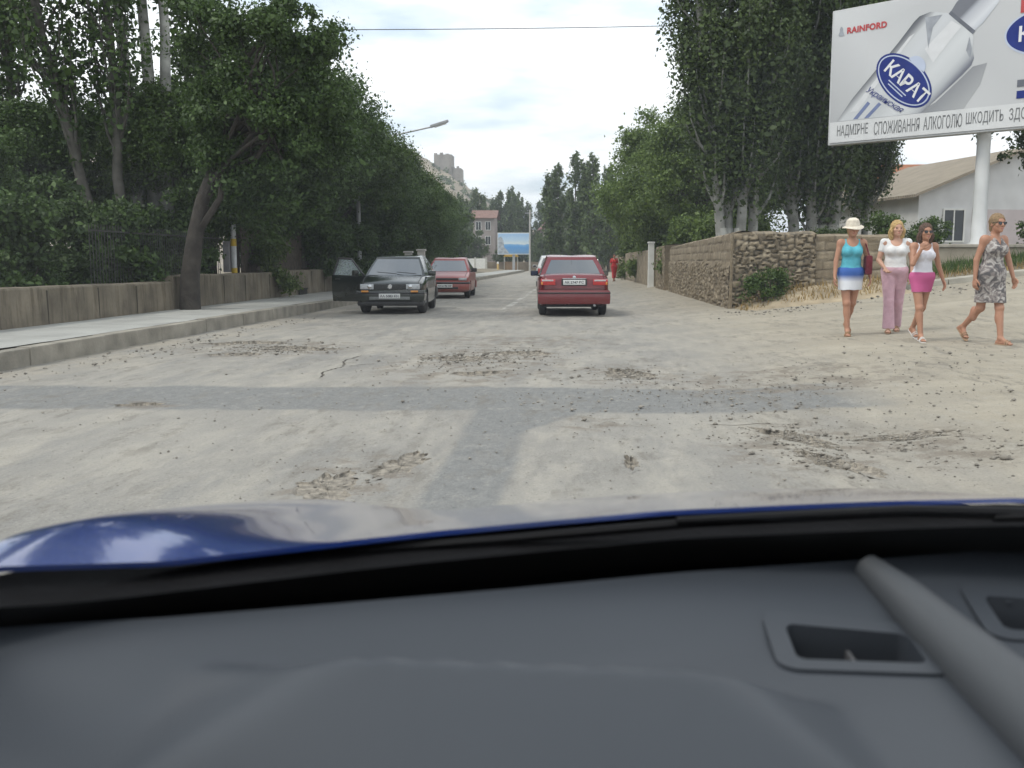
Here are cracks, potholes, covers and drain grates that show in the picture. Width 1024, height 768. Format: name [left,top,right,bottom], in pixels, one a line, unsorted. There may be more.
pothole [279,469,372,502]
pothole [783,448,902,481]
crack [315,355,375,378]
pothole [742,426,850,453]
pothole [352,449,441,482]
pothole [419,355,493,363]
pothole [597,368,665,381]
